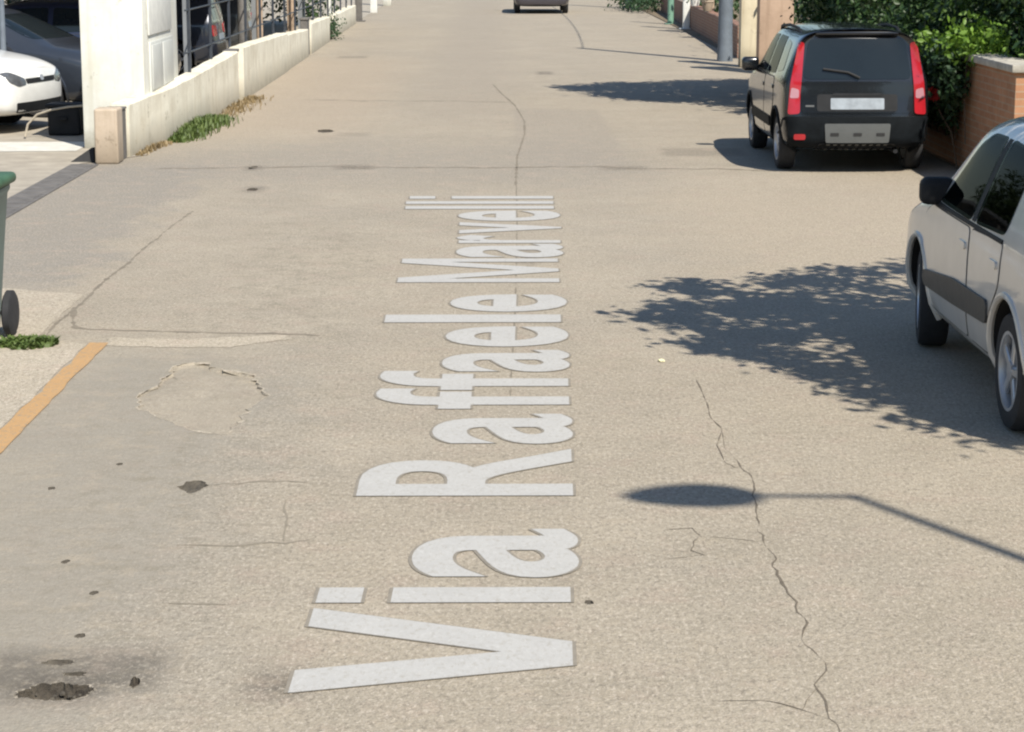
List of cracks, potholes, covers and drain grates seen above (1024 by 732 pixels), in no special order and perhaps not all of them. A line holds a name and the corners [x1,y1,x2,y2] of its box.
crack [667,380,840,732]
crack [192,501,313,547]
pothole [176,480,209,494]
pothole [13,682,96,701]
